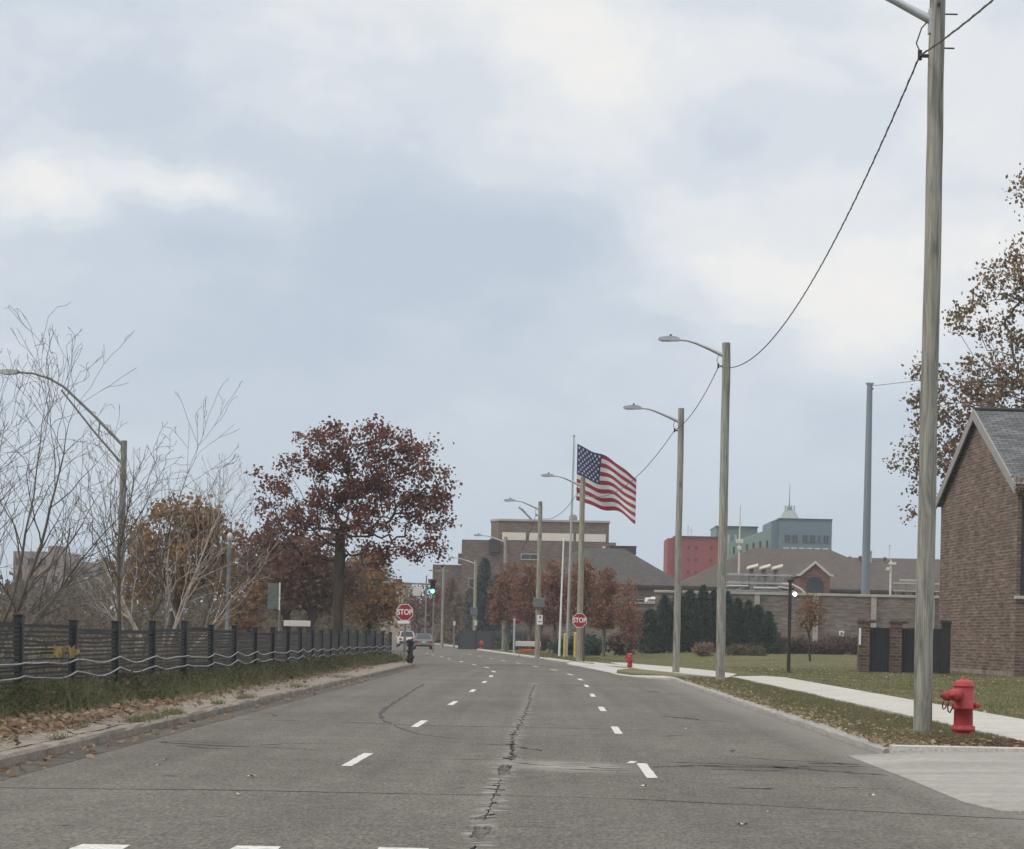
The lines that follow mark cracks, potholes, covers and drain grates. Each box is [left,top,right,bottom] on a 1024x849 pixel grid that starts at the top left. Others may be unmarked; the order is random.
crack [347,684,724,739]
crack [456,744,542,760]
